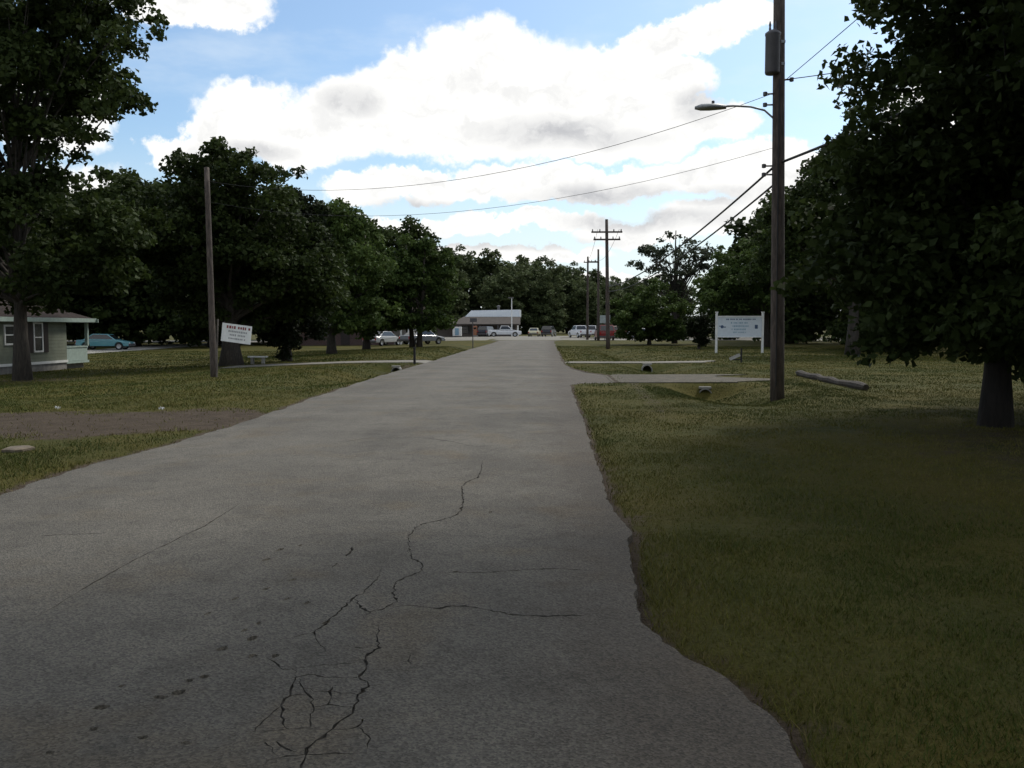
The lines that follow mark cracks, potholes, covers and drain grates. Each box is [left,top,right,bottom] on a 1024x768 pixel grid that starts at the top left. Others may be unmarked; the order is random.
crack [252,462,589,768]
crack [1,500,244,634]
